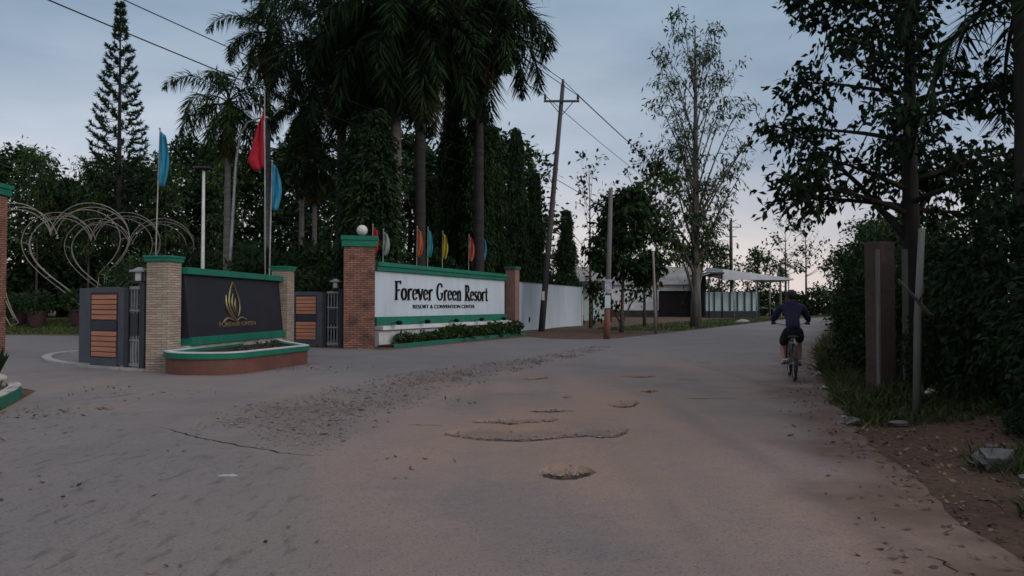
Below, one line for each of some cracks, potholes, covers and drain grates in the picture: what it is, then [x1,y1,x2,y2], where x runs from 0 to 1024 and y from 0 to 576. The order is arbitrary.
pothole [437,426,630,442]
crack [927,555,959,573]
pothole [466,415,560,425]
pothole [535,463,597,480]
pothole [607,398,640,408]
